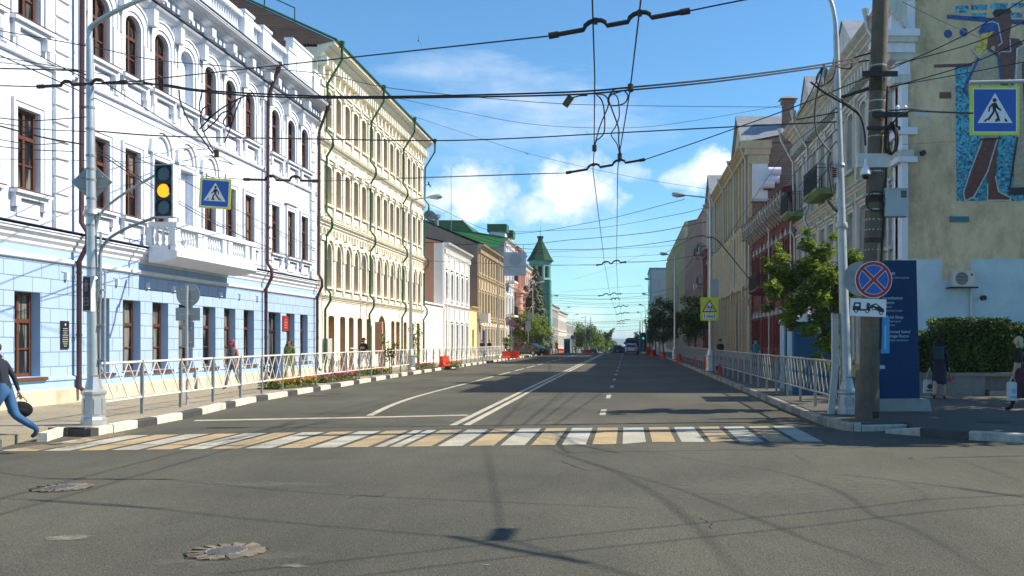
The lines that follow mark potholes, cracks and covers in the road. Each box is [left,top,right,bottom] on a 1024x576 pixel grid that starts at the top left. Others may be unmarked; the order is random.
manhole cover [28,483,94,492]
manhole cover [183,542,269,561]
